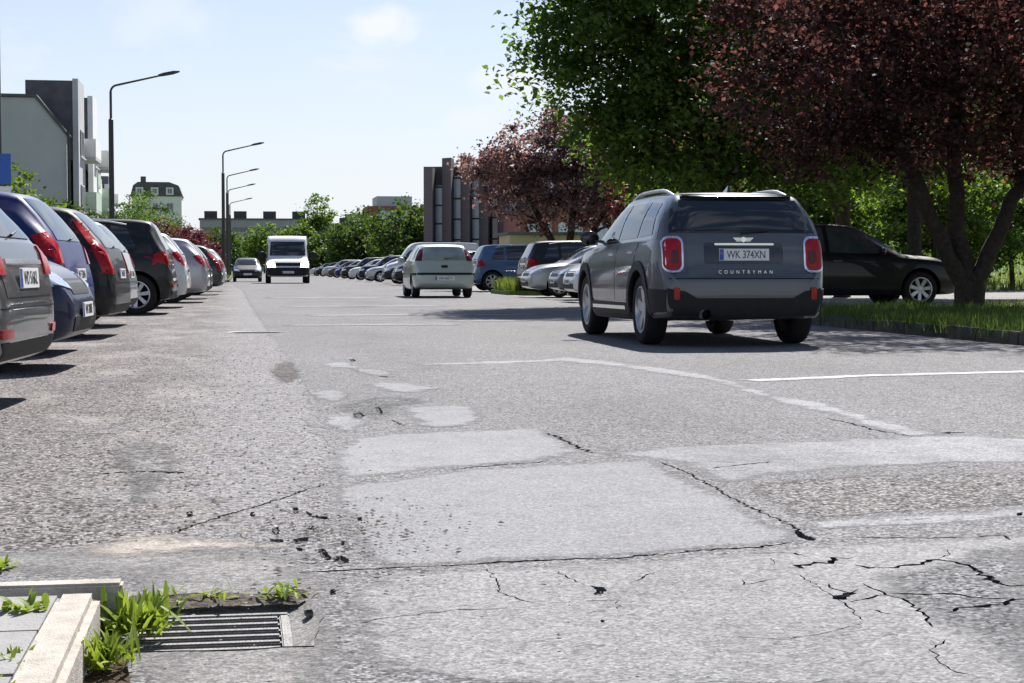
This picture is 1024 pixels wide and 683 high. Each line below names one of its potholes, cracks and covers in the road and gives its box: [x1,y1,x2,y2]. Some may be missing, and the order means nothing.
crack [603,553,659,580]
drain grate [117,588,324,653]
crack [727,537,1024,673]
crack [298,564,468,573]
